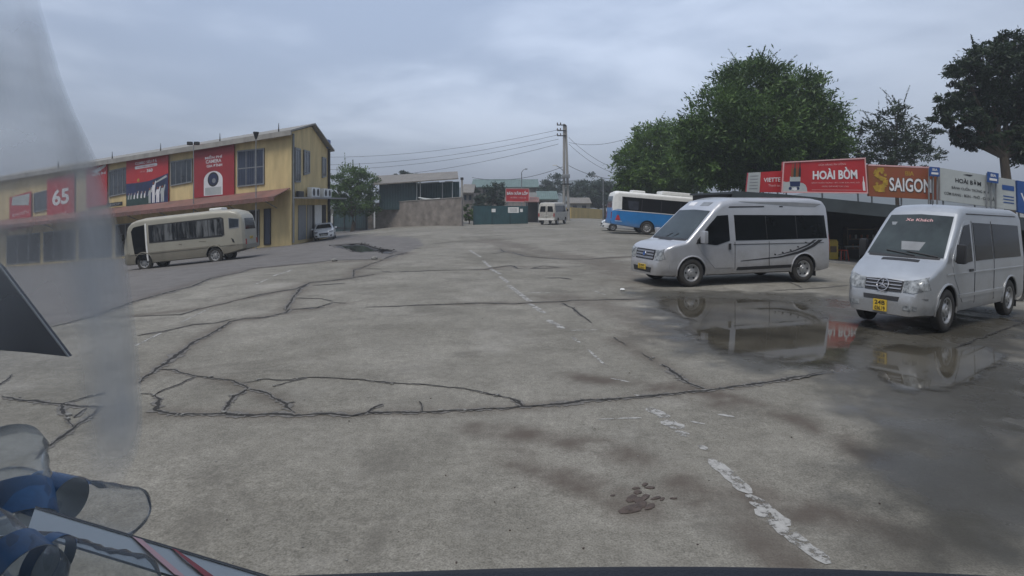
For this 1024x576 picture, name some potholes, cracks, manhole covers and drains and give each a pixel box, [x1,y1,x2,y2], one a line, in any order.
pothole [329,243,396,254]
crack [138,249,834,418]
crack [0,374,97,459]
